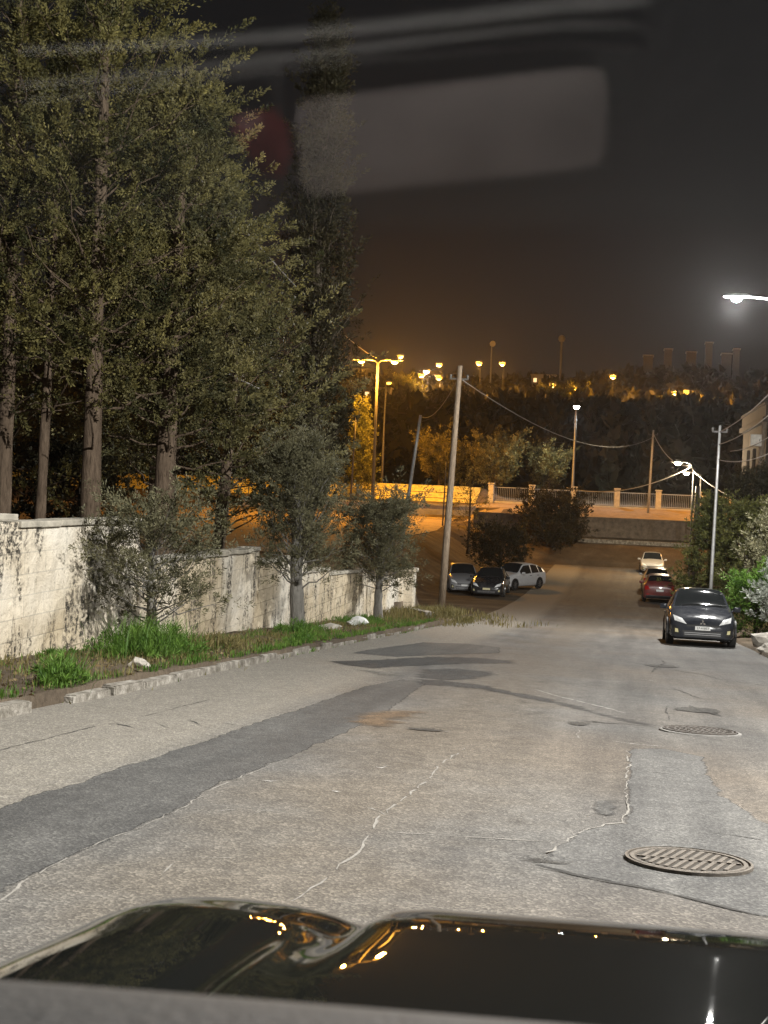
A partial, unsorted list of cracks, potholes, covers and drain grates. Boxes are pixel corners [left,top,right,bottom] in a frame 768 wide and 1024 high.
manhole cover [659,725,742,737]
crack [292,748,465,901]
crack [398,721,762,916]
manhole cover [624,846,754,877]
